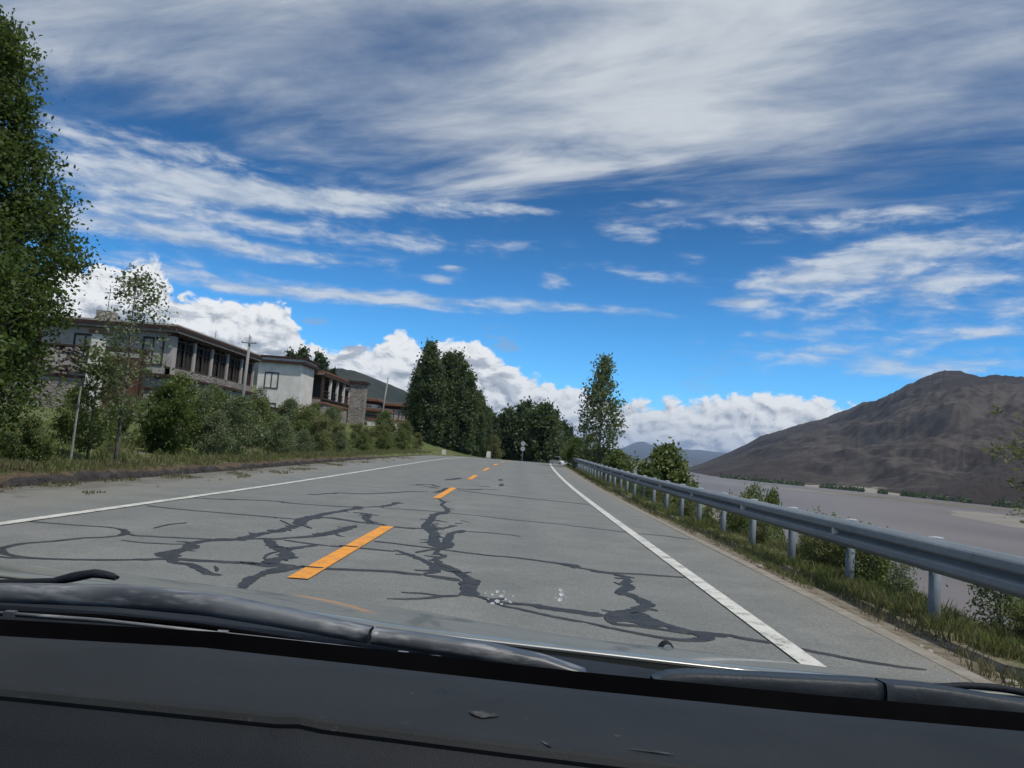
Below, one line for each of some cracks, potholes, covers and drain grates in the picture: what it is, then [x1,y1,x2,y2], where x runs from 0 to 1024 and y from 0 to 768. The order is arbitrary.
crack [146,491,690,578]
